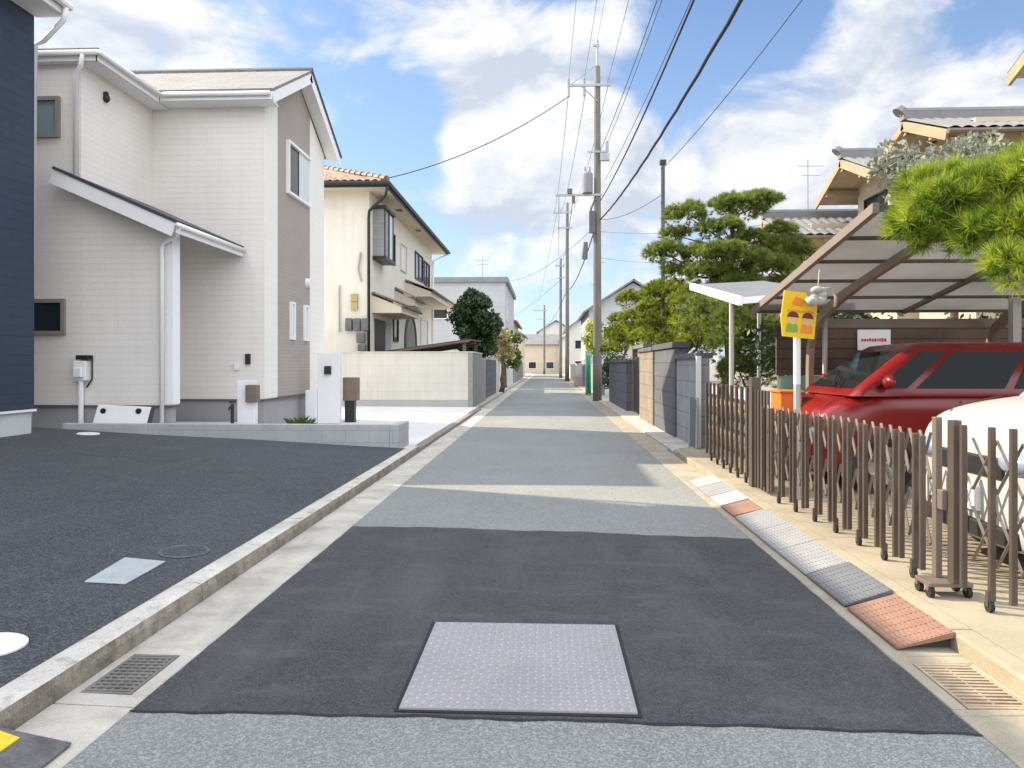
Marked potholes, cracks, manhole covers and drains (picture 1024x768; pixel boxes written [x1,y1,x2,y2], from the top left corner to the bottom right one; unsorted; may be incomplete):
drain grate [913,664,1024,710]
manhole cover [394,622,643,718]
drain grate [80,654,179,695]
manhole cover [84,557,165,584]
manhole cover [157,544,210,558]
